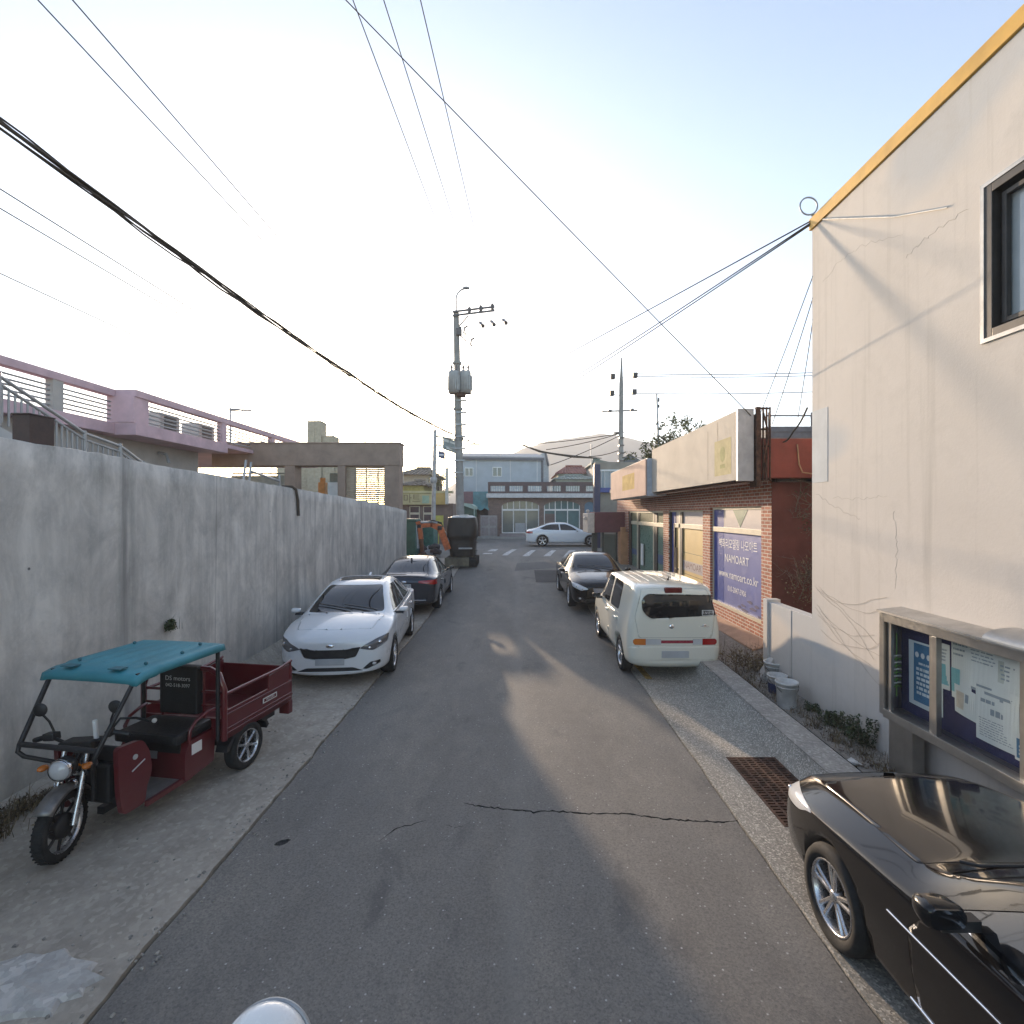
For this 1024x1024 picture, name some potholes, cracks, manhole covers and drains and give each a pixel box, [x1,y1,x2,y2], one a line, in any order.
crack [449,803,738,828]
drain grate [726,757,812,827]
